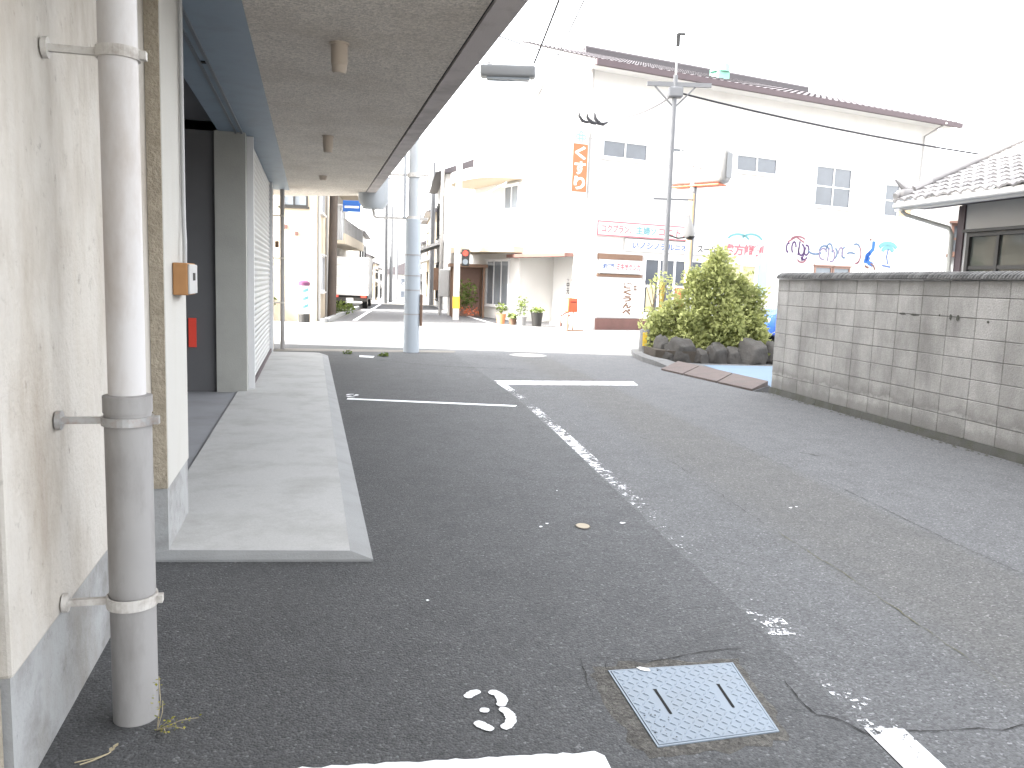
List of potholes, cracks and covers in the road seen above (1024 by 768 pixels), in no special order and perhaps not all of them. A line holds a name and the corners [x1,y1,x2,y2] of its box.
crack [580,648,742,696]
crack [785,681,1024,736]
manhole cover [590,658,790,759]
